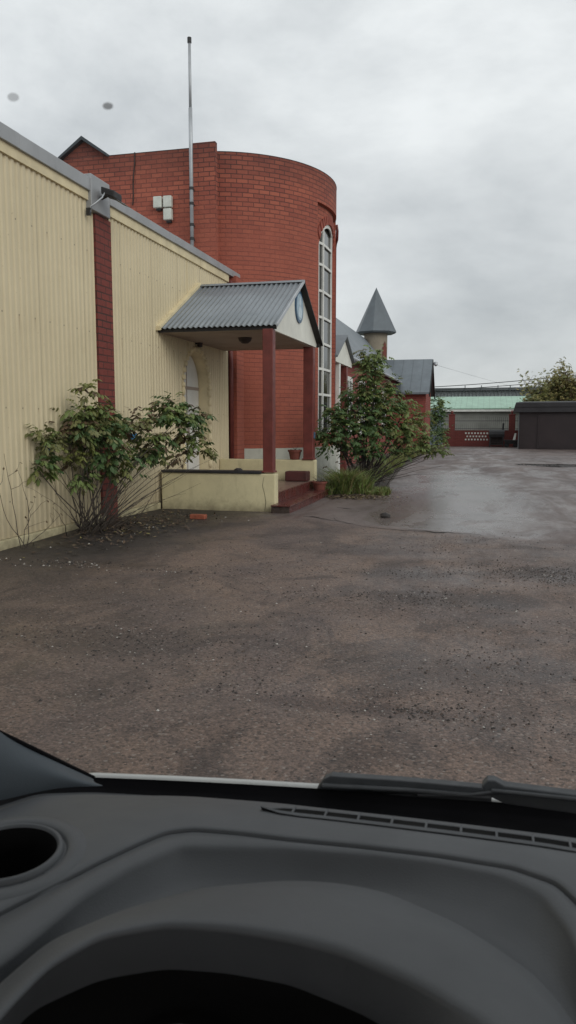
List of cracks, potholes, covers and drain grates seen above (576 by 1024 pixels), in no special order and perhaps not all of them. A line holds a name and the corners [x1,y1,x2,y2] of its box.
crack [303,507,480,535]
